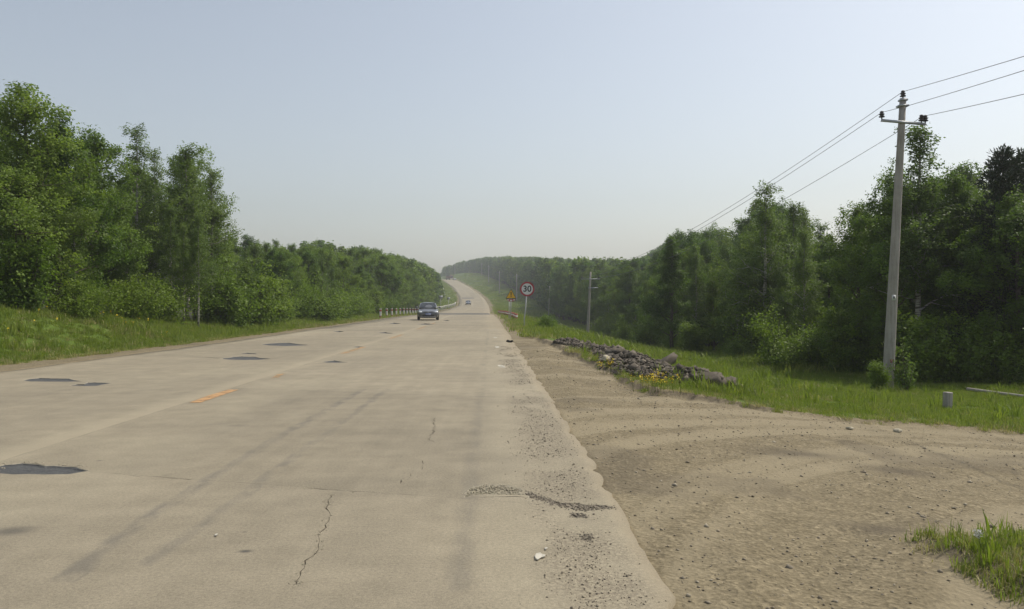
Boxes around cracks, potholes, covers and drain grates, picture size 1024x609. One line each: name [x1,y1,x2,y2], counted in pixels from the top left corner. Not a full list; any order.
pothole [521,490,616,512]
crack [288,488,381,587]
pothole [462,484,524,497]
